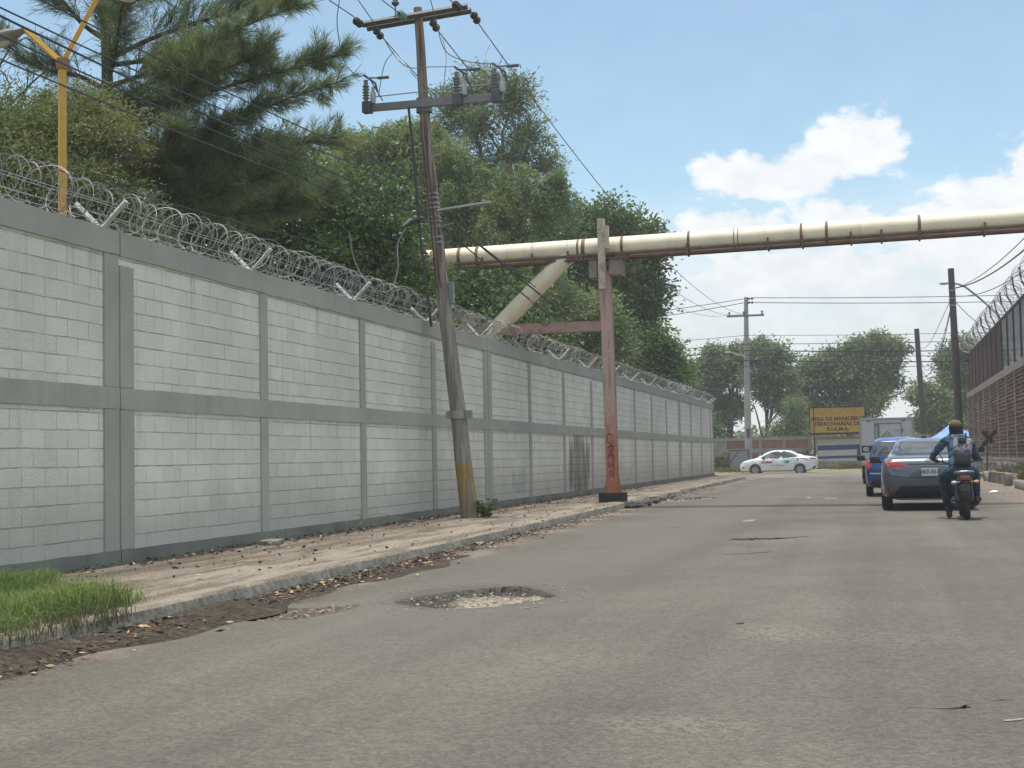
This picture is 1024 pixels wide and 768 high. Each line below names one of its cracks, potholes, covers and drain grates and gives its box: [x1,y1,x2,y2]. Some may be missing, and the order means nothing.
pothole [394,586,558,609]
crack [726,536,808,555]
pothole [246,604,362,621]
